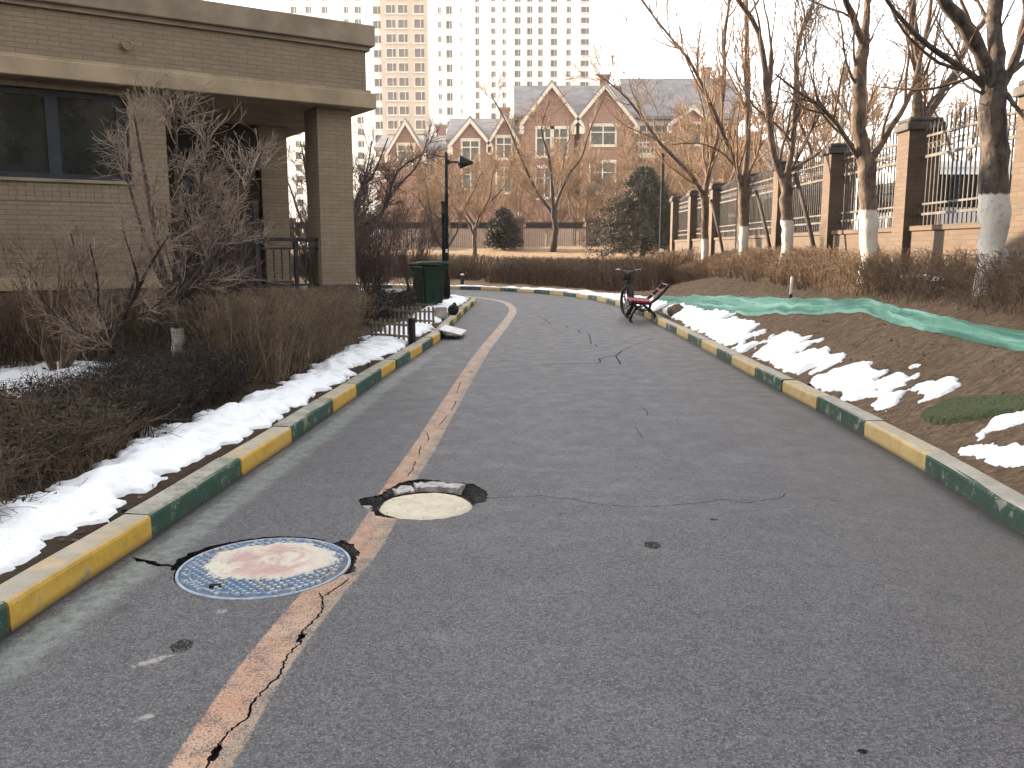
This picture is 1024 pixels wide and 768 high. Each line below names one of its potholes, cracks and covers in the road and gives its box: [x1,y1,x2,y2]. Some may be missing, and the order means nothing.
crack [408,371,473,476]
crack [132,536,349,768]
crack [495,316,653,368]
manhole cover [175,538,351,600]
crack [496,492,837,507]
